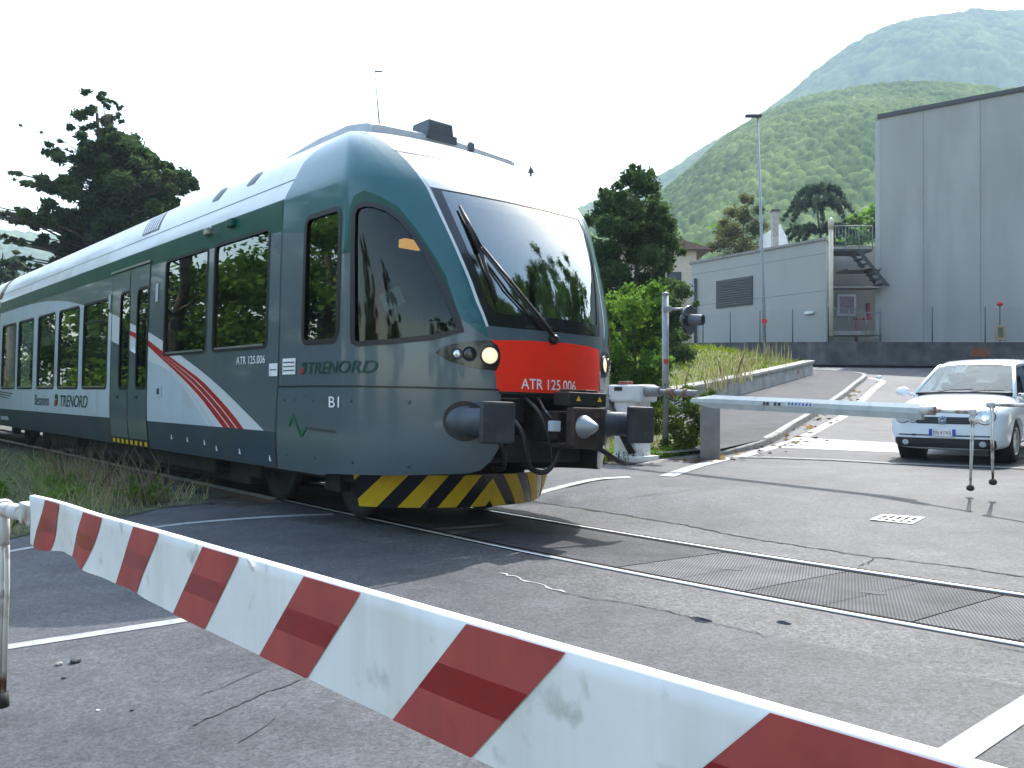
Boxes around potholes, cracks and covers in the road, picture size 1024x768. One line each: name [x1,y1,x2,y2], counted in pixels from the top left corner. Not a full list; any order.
crack [192,669,301,742]
drain grate [870,514,925,524]
crack [561,592,692,618]
crack [537,490,1024,577]
